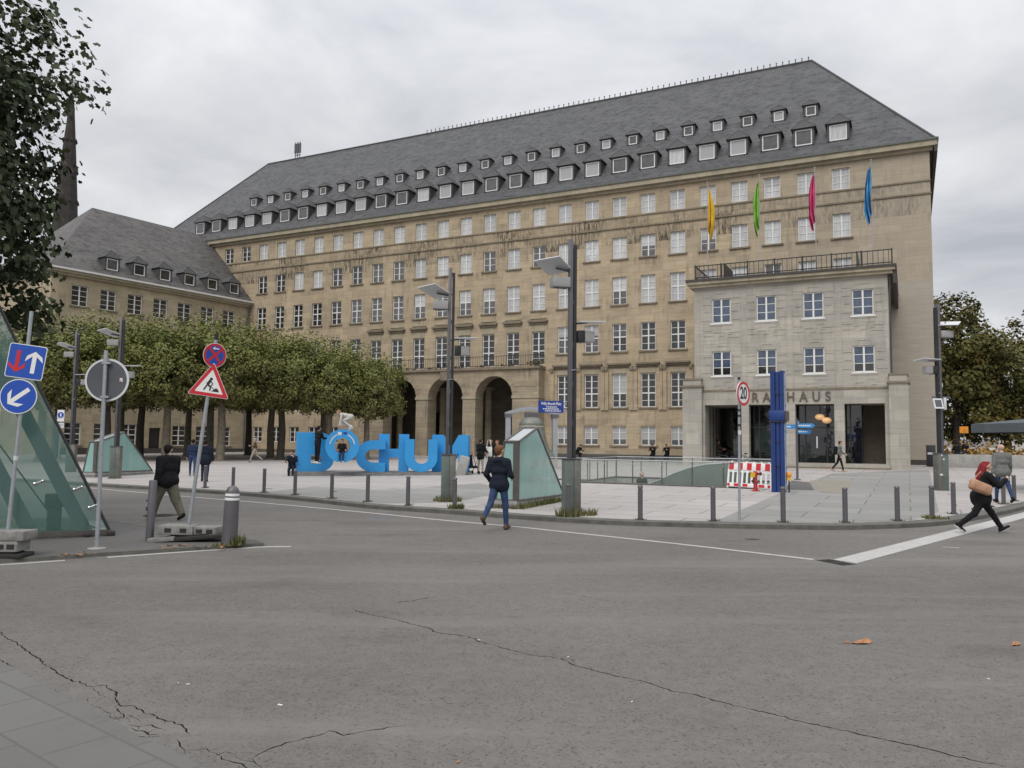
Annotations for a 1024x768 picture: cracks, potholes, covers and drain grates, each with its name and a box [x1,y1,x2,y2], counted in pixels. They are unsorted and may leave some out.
crack [353,609,1006,767]
crack [1,632,397,768]
